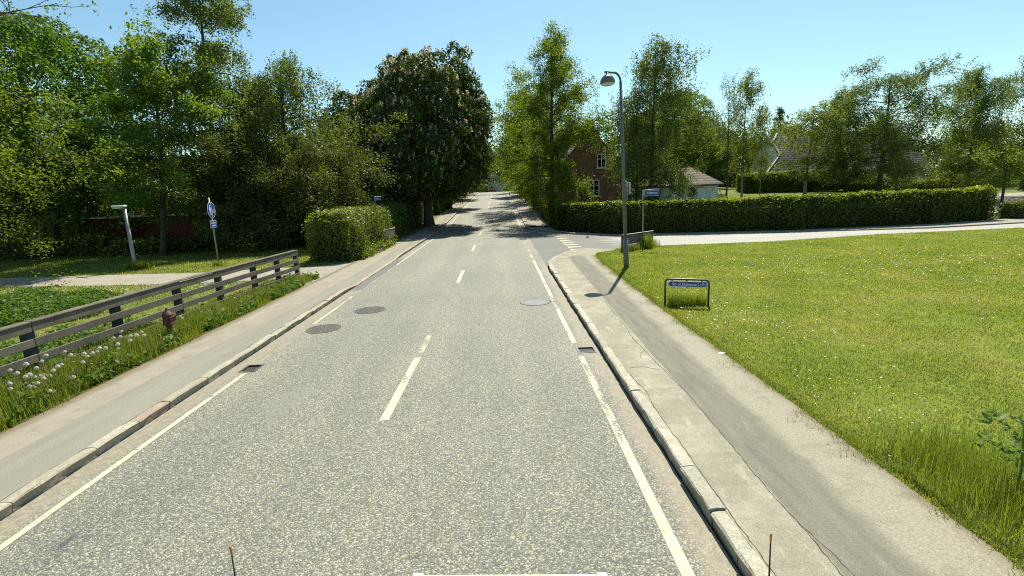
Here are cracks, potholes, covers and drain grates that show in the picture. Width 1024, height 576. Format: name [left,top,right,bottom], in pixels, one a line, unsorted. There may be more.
manhole cover [354,306,386,314]
drain grate [238,364,265,373]
manhole cover [305,324,341,334]
